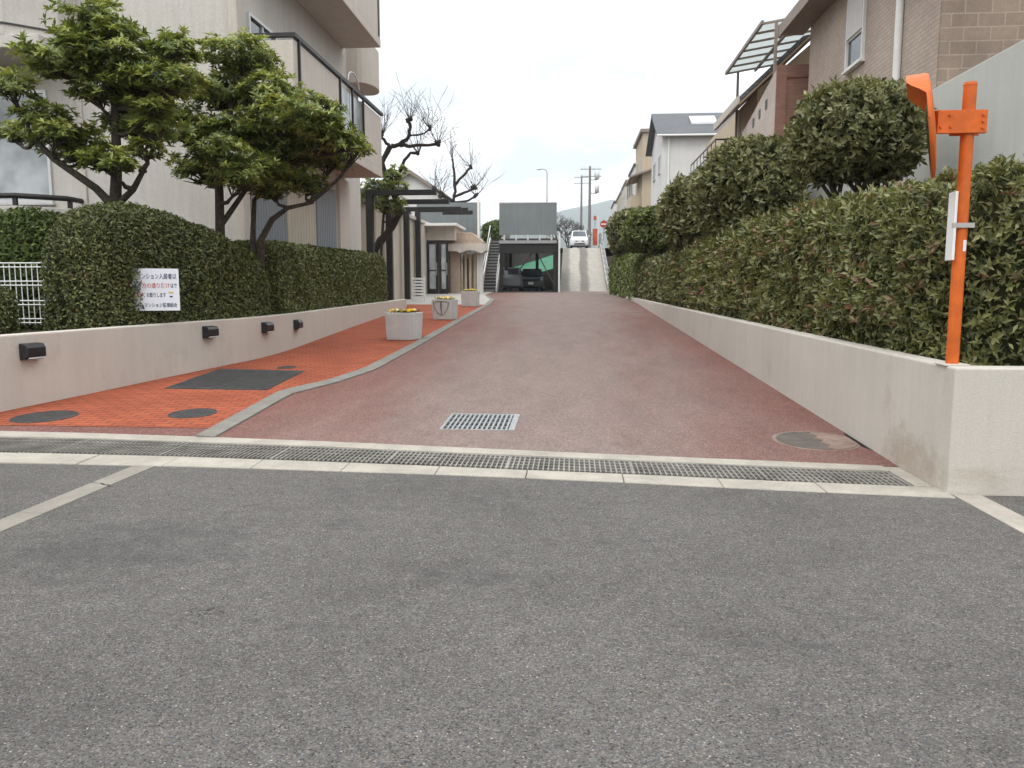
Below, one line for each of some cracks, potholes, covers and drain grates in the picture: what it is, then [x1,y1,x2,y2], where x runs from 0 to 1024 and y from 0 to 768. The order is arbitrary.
manhole cover [772,431,860,451]
manhole cover [9,410,79,426]
manhole cover [168,408,217,418]
drain grate [440,413,520,430]
manhole cover [164,369,304,390]
